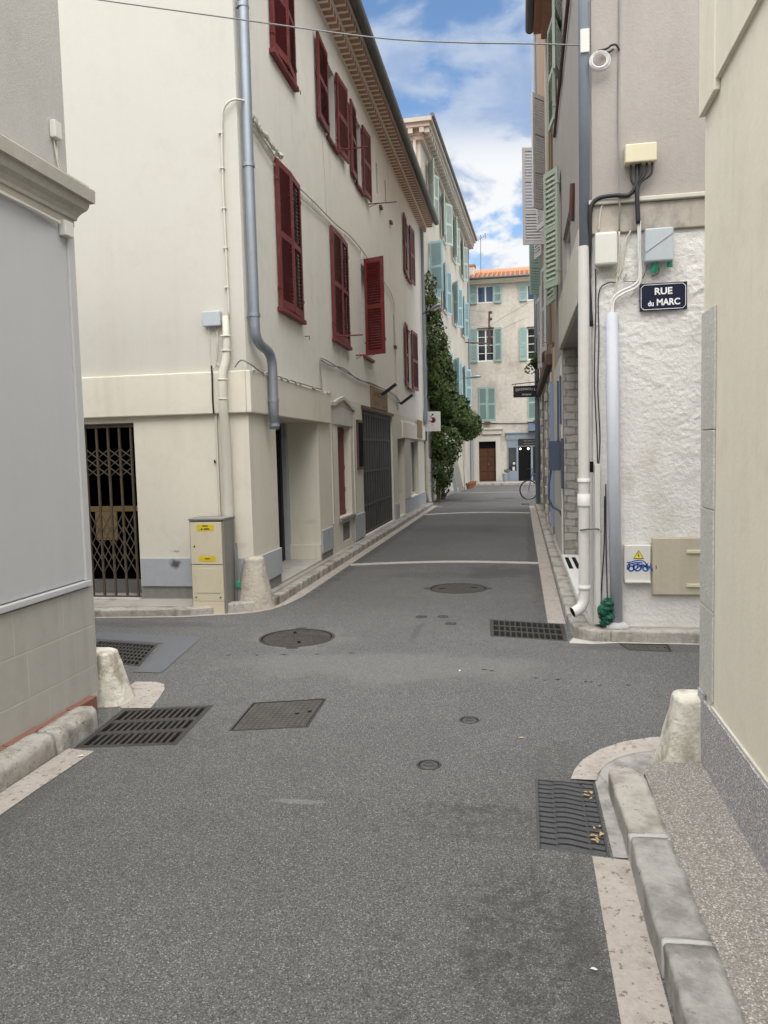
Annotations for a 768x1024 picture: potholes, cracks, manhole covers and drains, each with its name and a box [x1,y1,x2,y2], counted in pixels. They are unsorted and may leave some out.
drain grate [74,705,213,748]
drain grate [490,619,568,641]
manhole cover [258,627,335,649]
manhole cover [618,643,672,652]
utility cover [459,716,480,724]
drain grate [96,640,158,667]
drain grate [535,778,610,857]
utility cover [416,759,442,770]
manhole cover [229,698,327,731]
manhole cover [424,583,492,594]
